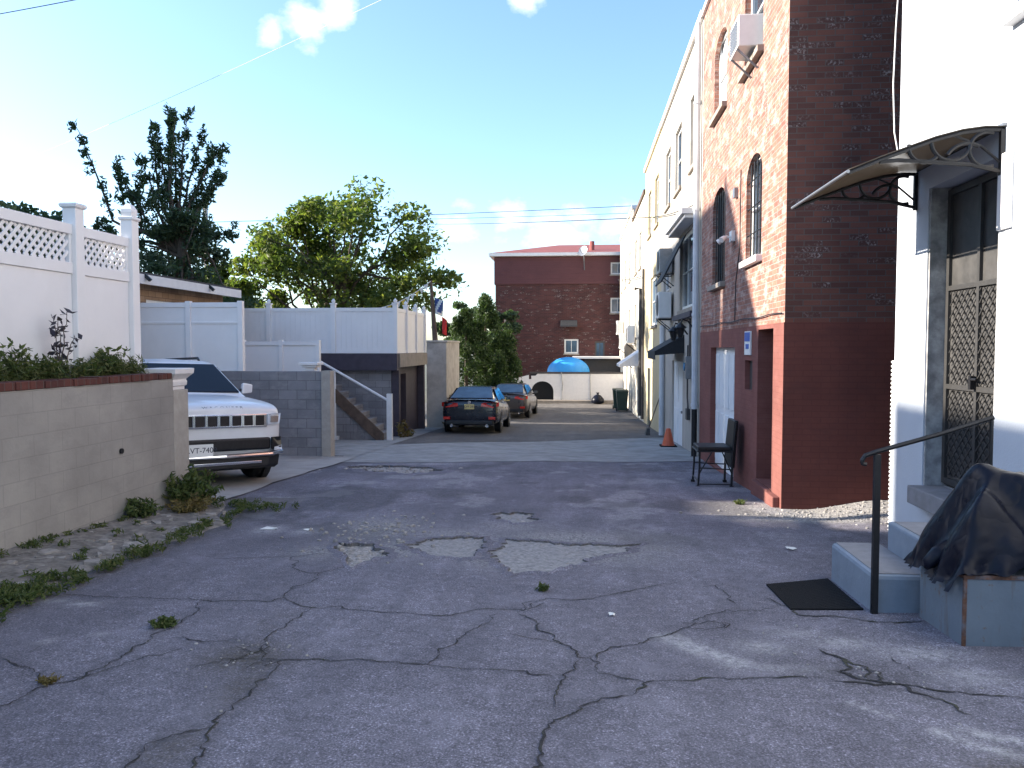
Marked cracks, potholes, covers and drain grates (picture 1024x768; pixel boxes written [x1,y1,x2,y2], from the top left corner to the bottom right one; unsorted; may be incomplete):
crack [819,649,1024,715]
crack [0,553,921,768]
pothole [477,537,649,577]
pothole [393,535,496,561]
pothole [326,541,401,571]
pothole [335,464,456,475]
pothole [482,511,549,525]
